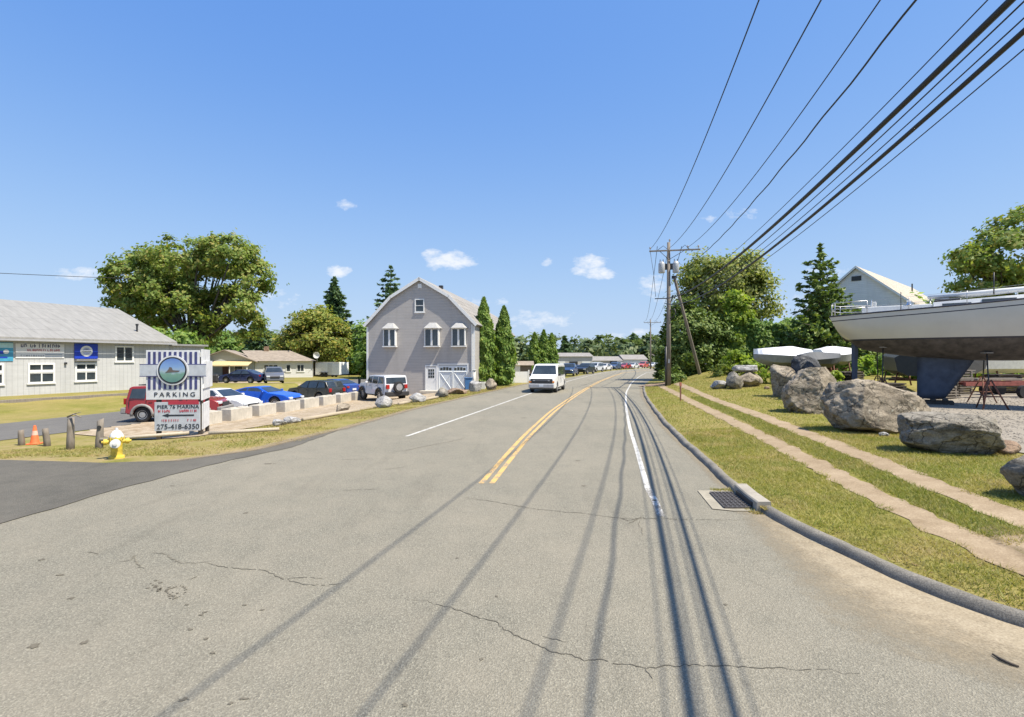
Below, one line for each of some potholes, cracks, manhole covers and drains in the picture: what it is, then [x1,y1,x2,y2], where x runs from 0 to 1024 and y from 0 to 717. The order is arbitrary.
drain grate [698,484,771,511]
crack [413,599,850,678]
crack [466,497,731,533]
crack [163,553,340,585]
